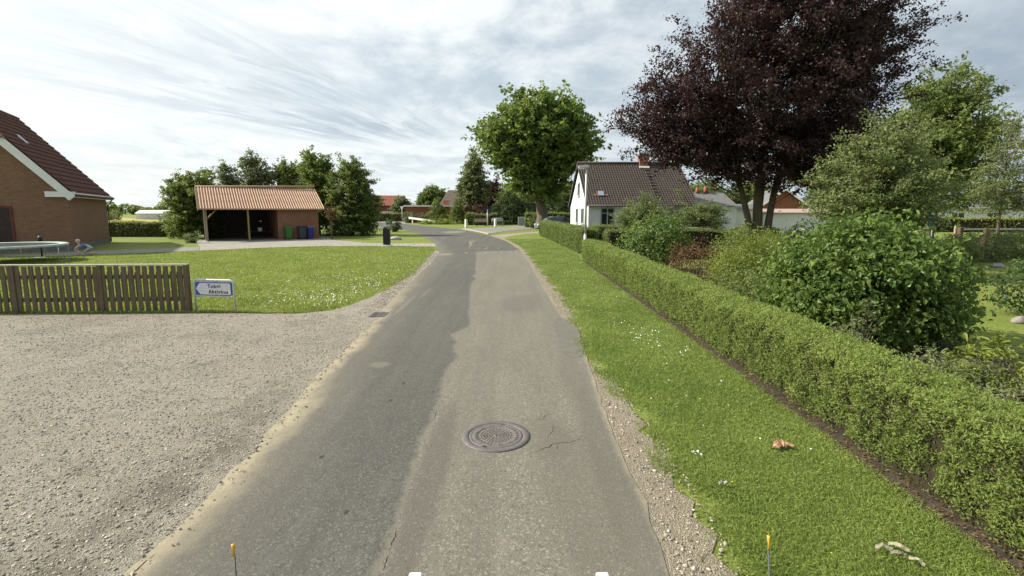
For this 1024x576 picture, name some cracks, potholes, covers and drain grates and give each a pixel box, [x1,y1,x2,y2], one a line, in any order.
manhole cover [461,421,530,453]
